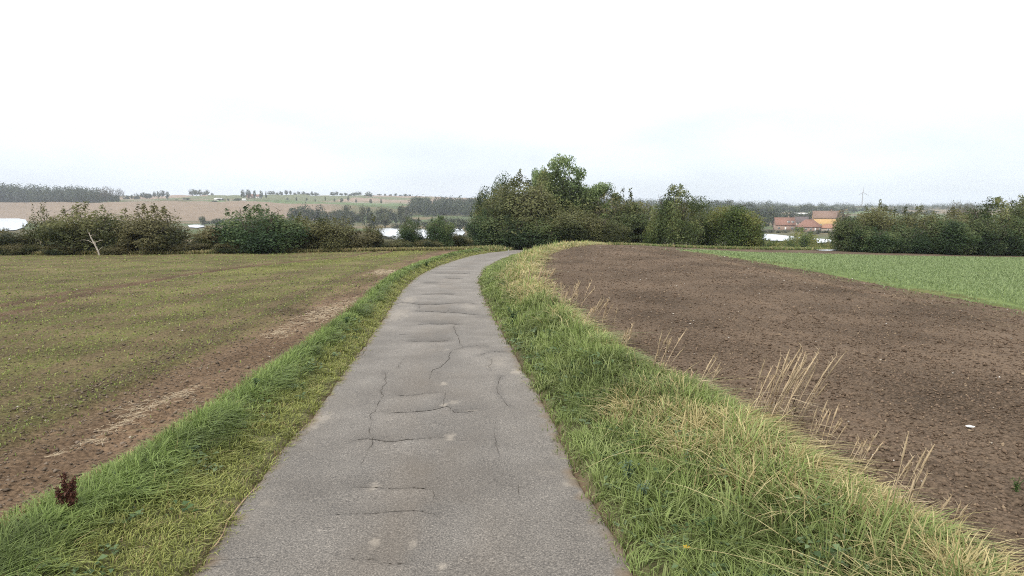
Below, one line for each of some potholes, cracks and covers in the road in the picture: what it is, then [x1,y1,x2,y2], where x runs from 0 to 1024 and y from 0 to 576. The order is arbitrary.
crack [352,273,477,465]
